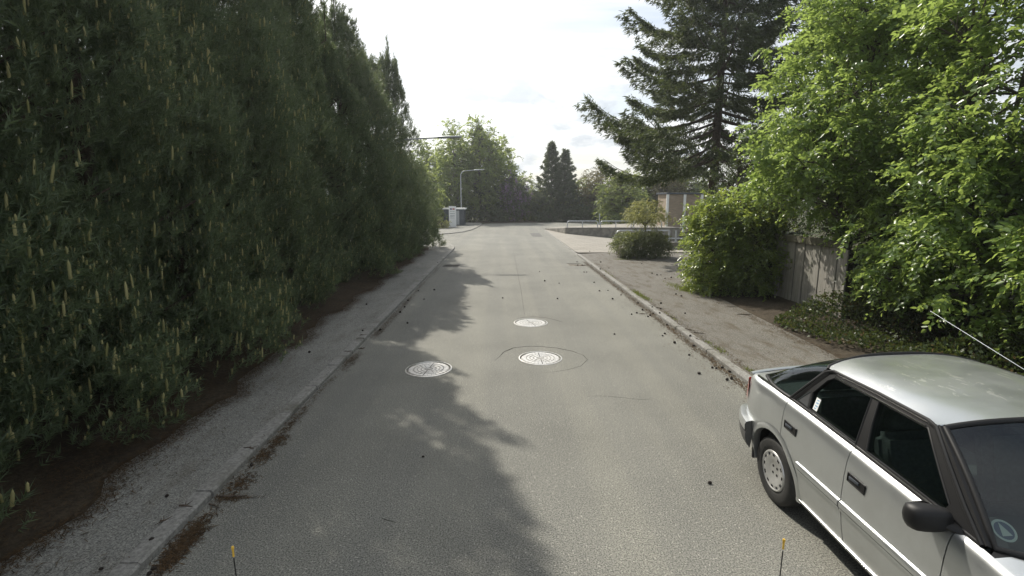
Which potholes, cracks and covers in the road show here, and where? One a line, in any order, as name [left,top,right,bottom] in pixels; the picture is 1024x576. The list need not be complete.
manhole cover [405,361,452,377]
manhole cover [514,318,548,327]
manhole cover [518,351,562,365]
